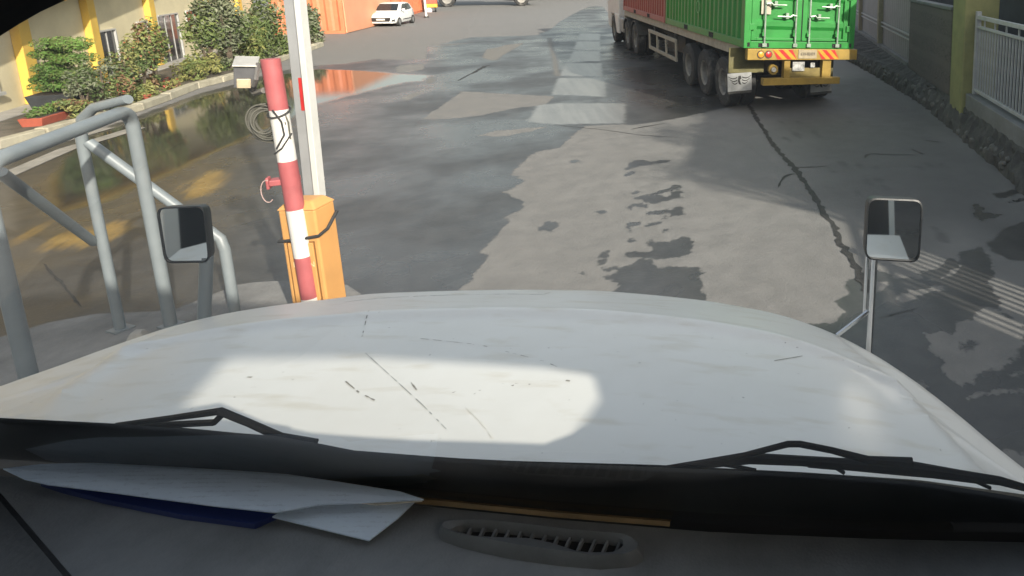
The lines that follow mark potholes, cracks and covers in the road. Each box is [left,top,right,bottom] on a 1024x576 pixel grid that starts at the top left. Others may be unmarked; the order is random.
crack [44,264,82,307]
crack [747,104,937,293]
